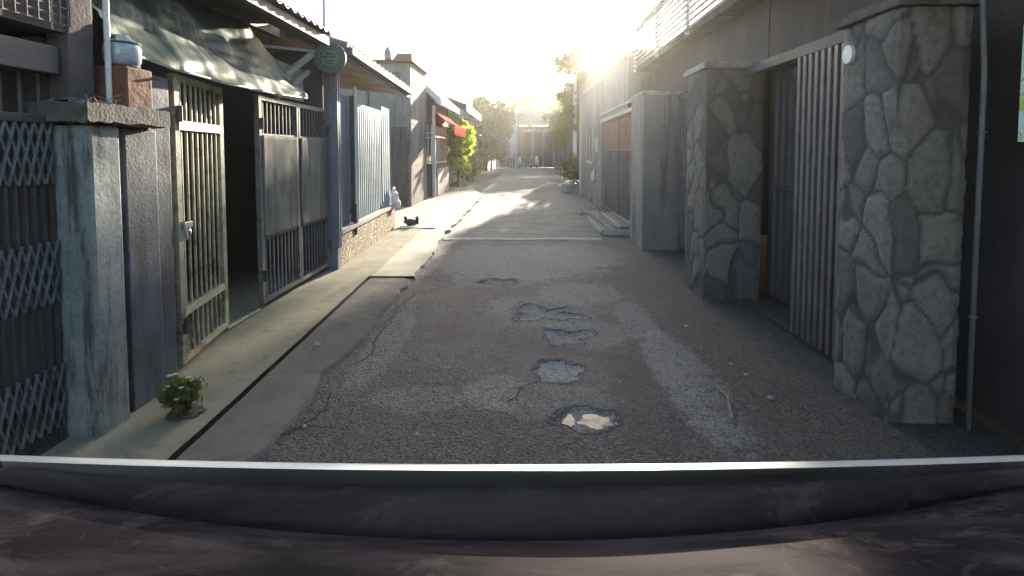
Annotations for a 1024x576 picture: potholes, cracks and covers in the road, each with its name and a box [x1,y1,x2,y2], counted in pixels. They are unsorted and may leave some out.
pothole [529,358,590,385]
pothole [475,278,519,286]
crack [279,393,351,437]
crack [472,381,549,420]
pothole [546,405,624,435]
pothole [509,302,592,322]
pothole [539,326,599,347]
